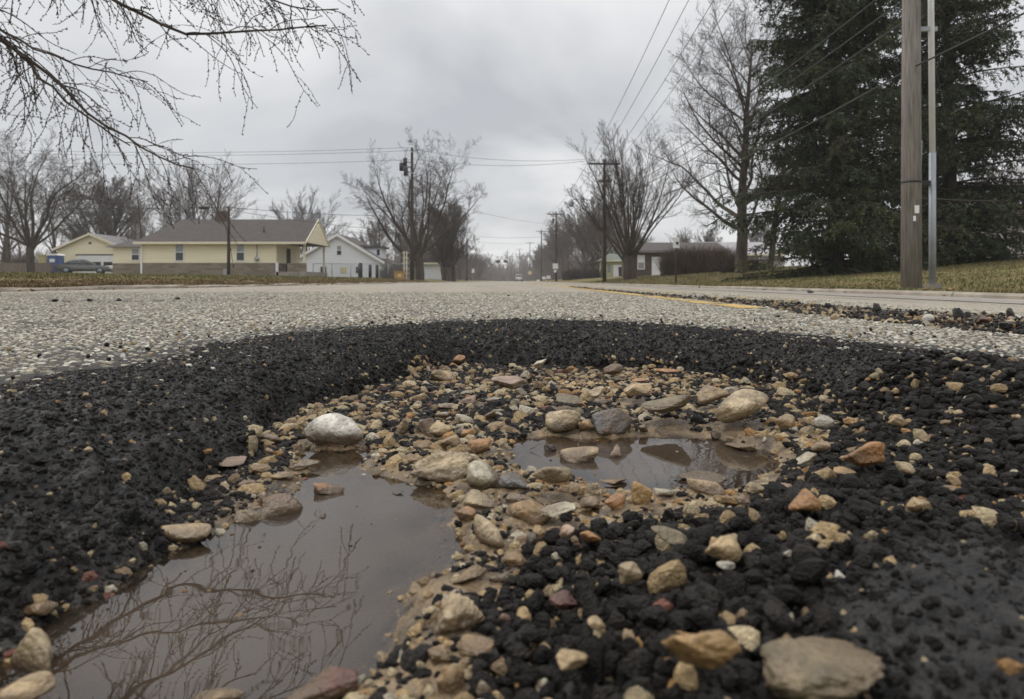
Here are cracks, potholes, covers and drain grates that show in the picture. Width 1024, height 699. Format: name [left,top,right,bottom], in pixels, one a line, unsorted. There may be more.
pothole [0,317,1024,699]
